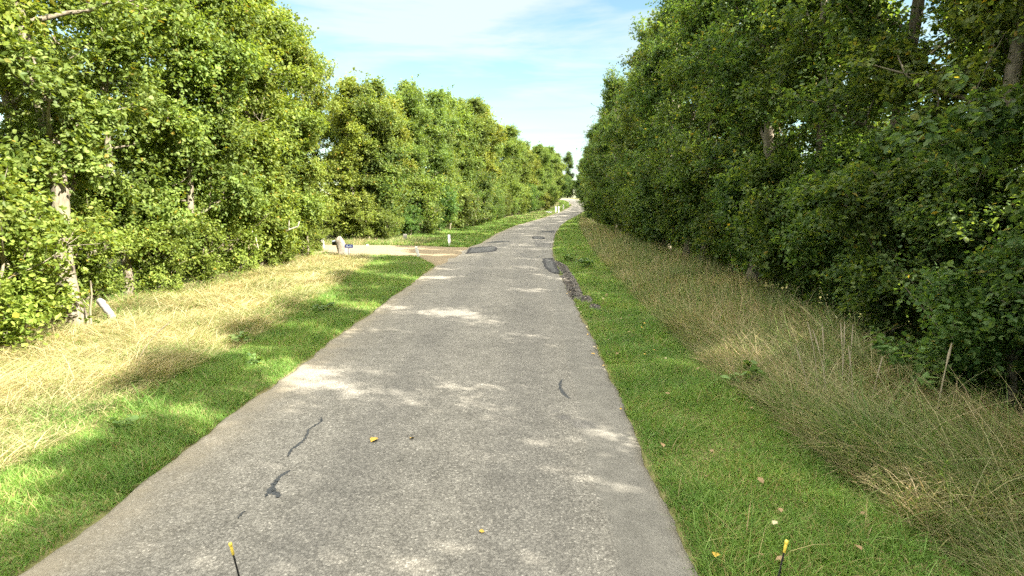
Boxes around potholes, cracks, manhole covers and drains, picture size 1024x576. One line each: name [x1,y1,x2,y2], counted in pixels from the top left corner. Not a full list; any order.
pothole [554,260,584,300]
